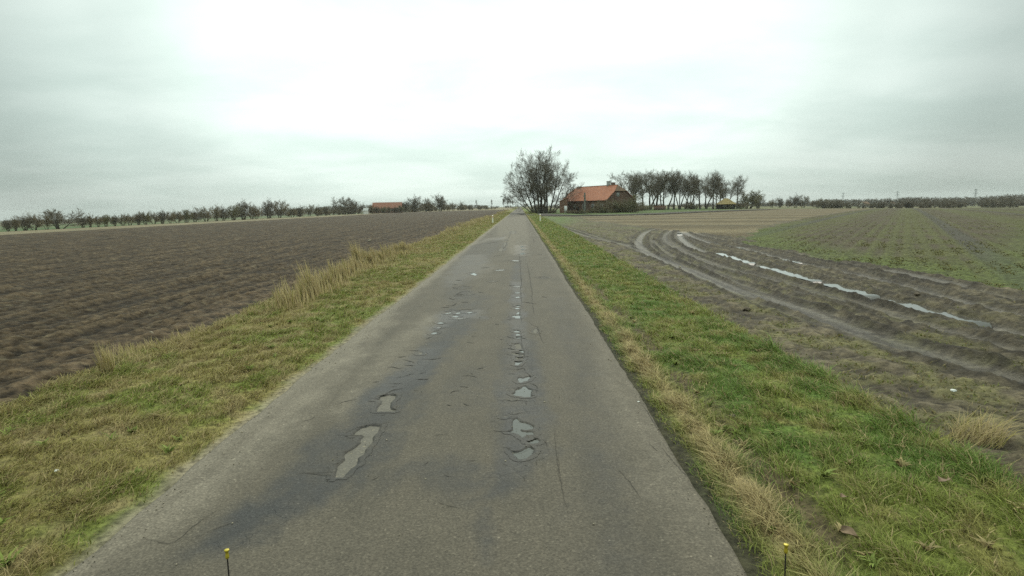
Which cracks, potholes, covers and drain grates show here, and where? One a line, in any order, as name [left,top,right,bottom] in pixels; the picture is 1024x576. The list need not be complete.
pothole [326,421,387,481]
pothole [368,392,402,414]
pothole [520,435,546,446]
pothole [504,444,541,462]
crack [475,234,568,513]
pothole [512,374,536,384]
pothole [506,384,537,398]
pothole [509,342,527,350]
pothole [502,415,541,441]
